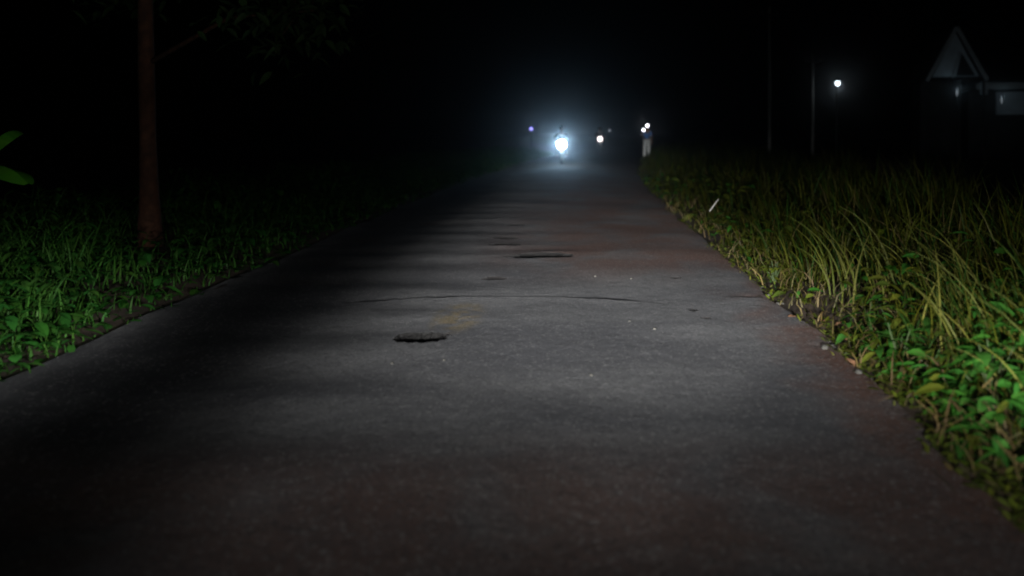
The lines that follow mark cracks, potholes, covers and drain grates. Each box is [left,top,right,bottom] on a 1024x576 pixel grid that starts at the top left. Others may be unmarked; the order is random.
pothole [393,332,451,343]
